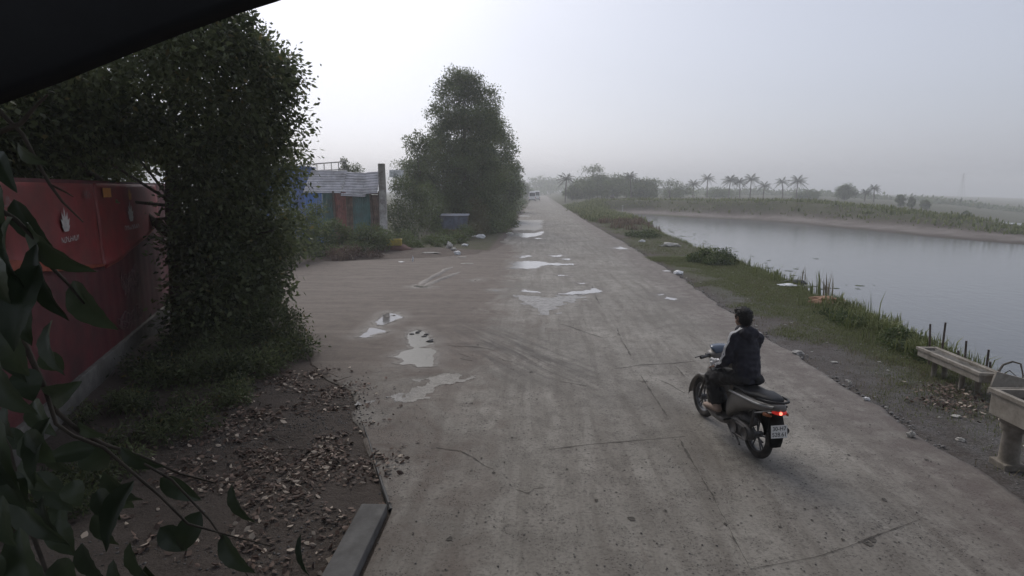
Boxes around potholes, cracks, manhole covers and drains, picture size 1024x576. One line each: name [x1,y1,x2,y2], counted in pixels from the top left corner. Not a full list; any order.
crack [641,369,683,416]
